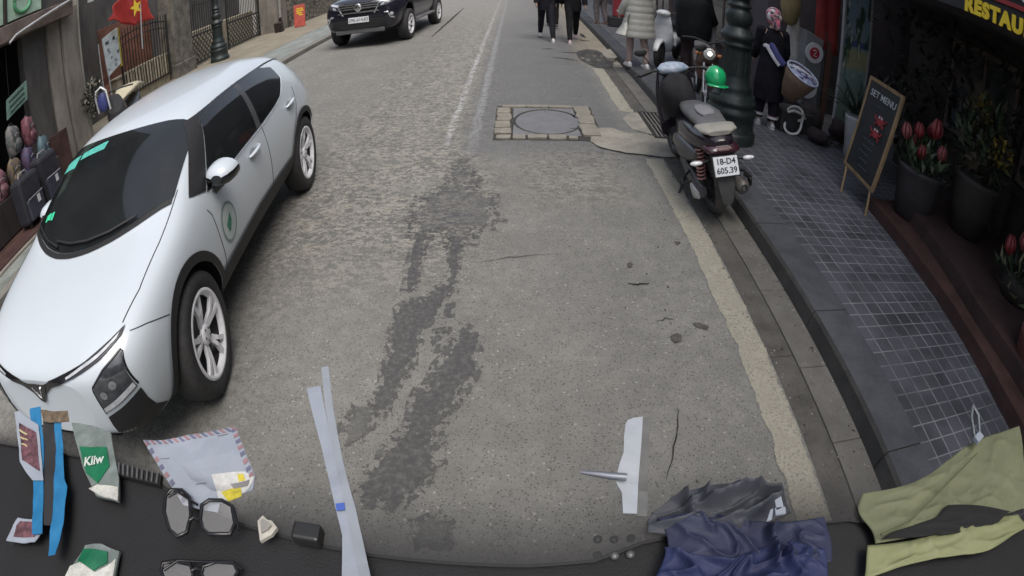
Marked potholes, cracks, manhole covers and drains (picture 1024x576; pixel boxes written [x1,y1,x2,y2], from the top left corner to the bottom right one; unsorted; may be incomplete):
crack [667,408,679,476]
manhole cover [493,105,601,141]
drain grate [637,111,667,139]
